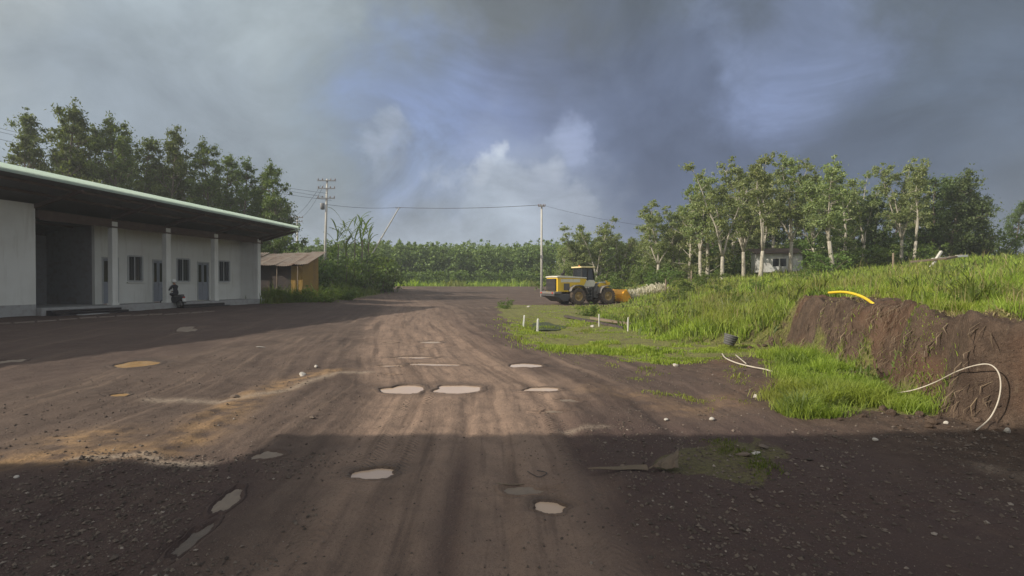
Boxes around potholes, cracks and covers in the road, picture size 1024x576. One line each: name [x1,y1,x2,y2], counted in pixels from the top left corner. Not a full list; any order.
pothole [529,498,573,516]
pothole [172,325,202,333]
pothole [243,448,292,462]
pothole [426,384,488,395]
pothole [493,484,558,497]
pothole [342,465,402,481]
pothole [203,482,248,519]
pothole [372,383,430,395]
pothole [156,515,225,566]
